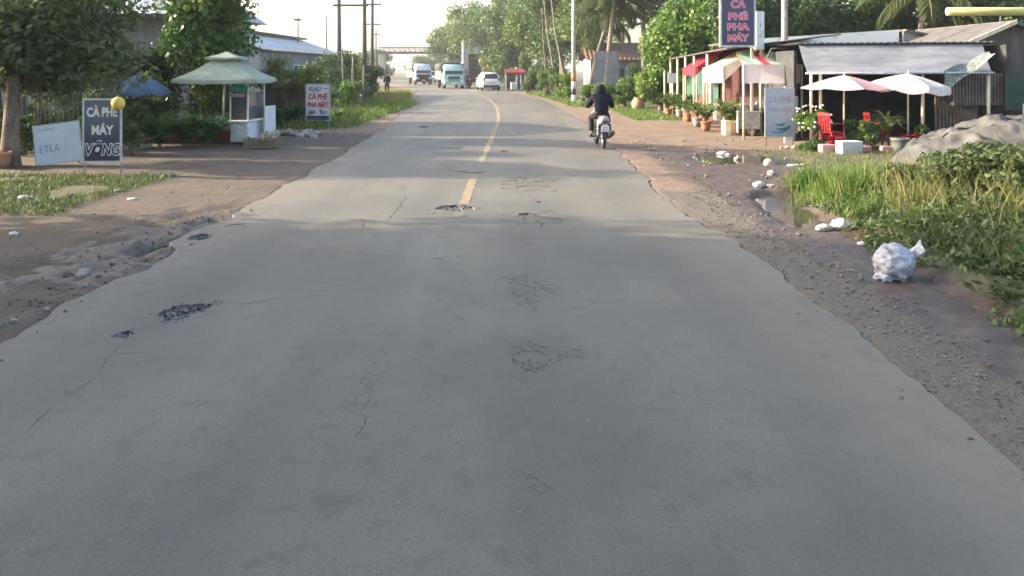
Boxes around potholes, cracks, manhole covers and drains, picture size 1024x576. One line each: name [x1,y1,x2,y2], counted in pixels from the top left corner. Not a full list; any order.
crack [501,209,568,228]
crack [499,275,562,311]
pothole [110,327,136,339]
pothole [435,204,480,212]
crack [342,350,391,438]
crack [1,345,139,447]
crack [507,340,582,374]
crack [501,177,556,193]
pothole [149,300,222,326]
